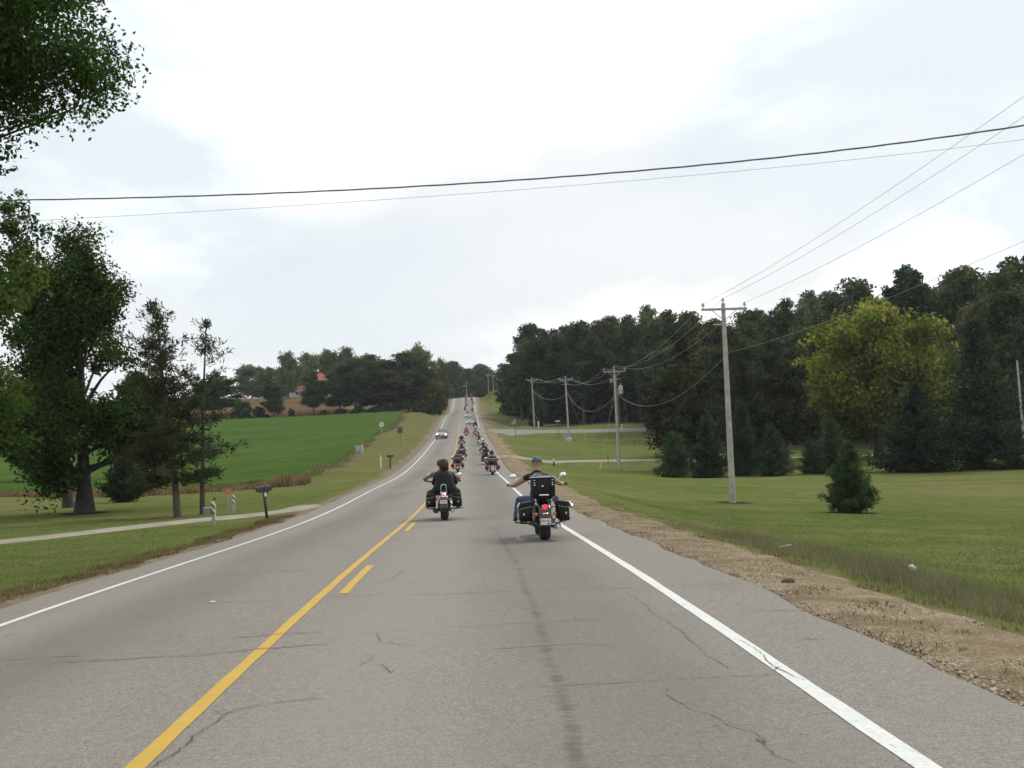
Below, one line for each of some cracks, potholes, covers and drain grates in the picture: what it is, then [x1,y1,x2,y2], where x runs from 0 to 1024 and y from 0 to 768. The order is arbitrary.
crack [105,557,791,761]
crack [6,632,328,665]
